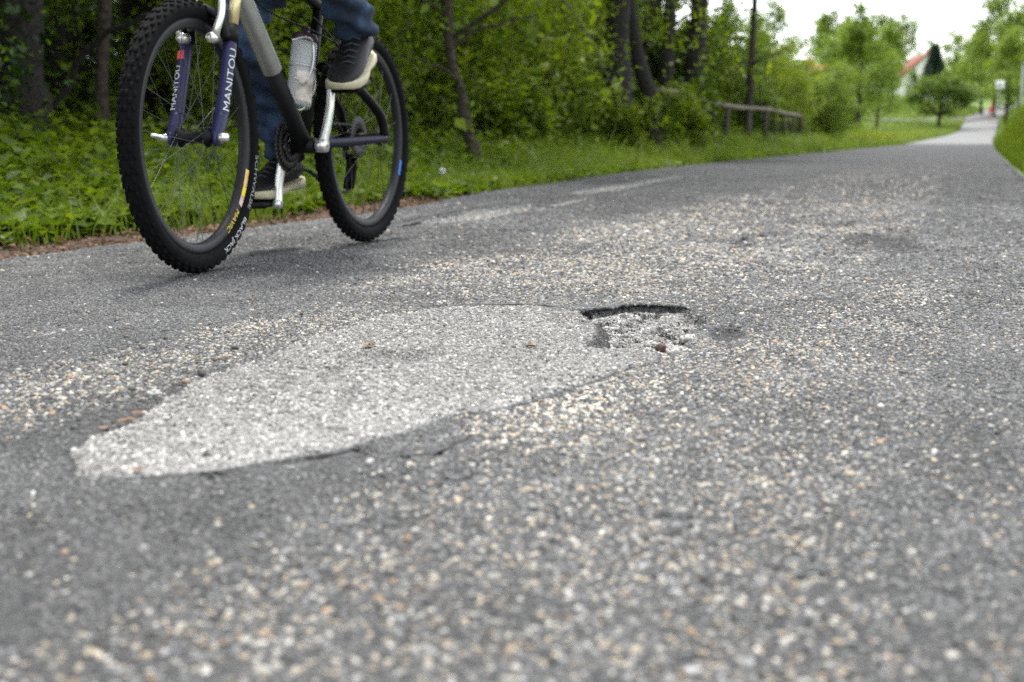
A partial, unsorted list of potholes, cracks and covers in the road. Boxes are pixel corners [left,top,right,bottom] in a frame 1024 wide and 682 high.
pothole [583,303,710,357]
